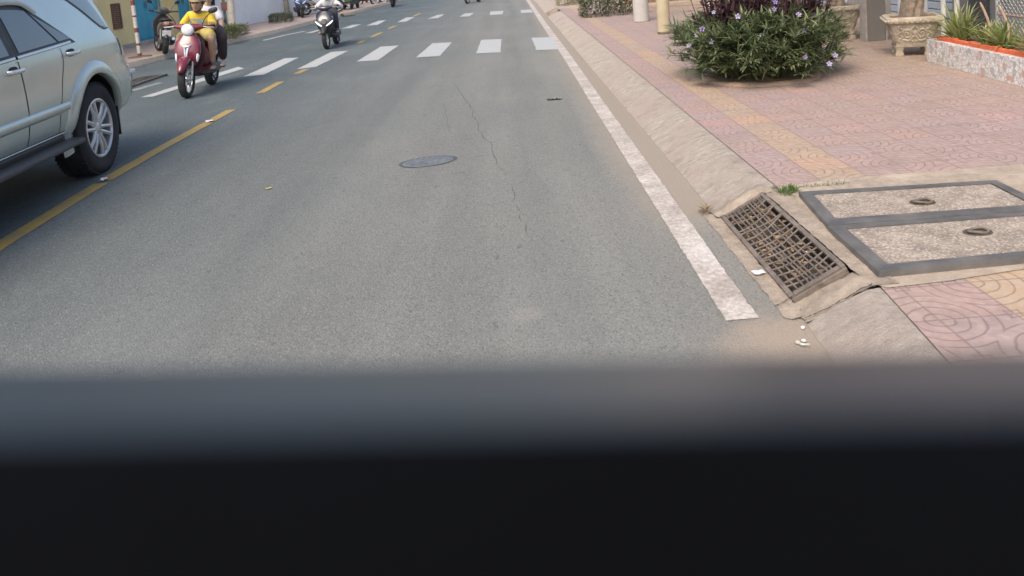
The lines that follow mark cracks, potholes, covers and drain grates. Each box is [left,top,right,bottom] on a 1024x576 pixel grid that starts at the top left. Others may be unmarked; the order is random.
crack [443,67,503,170]
crack [777,283,872,318]
manhole cover [399,155,458,168]
drain grate [721,192,850,312]
